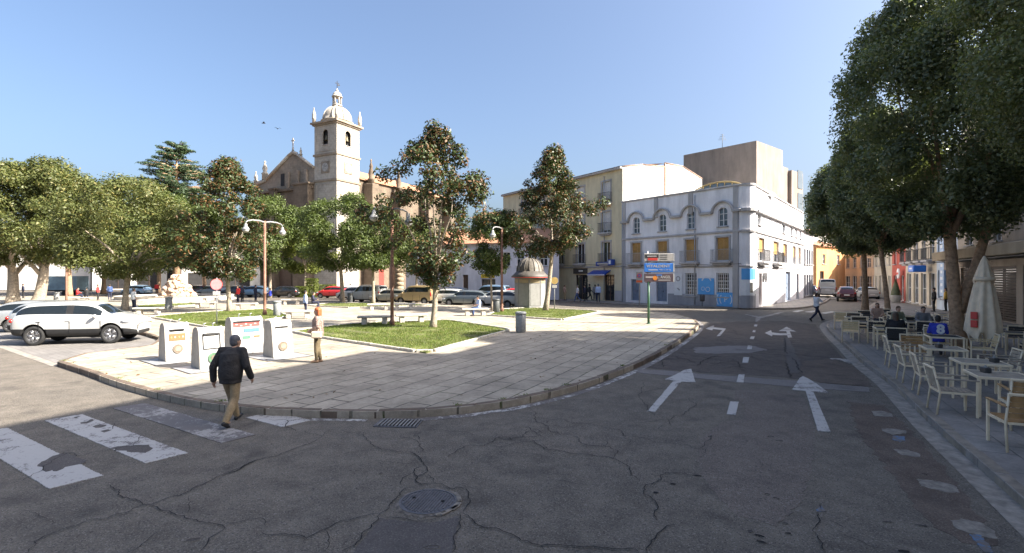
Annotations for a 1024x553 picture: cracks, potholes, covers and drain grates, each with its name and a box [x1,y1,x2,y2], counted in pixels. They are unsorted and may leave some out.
manhole cover [394,488,462,518]
drain grate [373,418,424,428]
crack [28,382,724,552]
